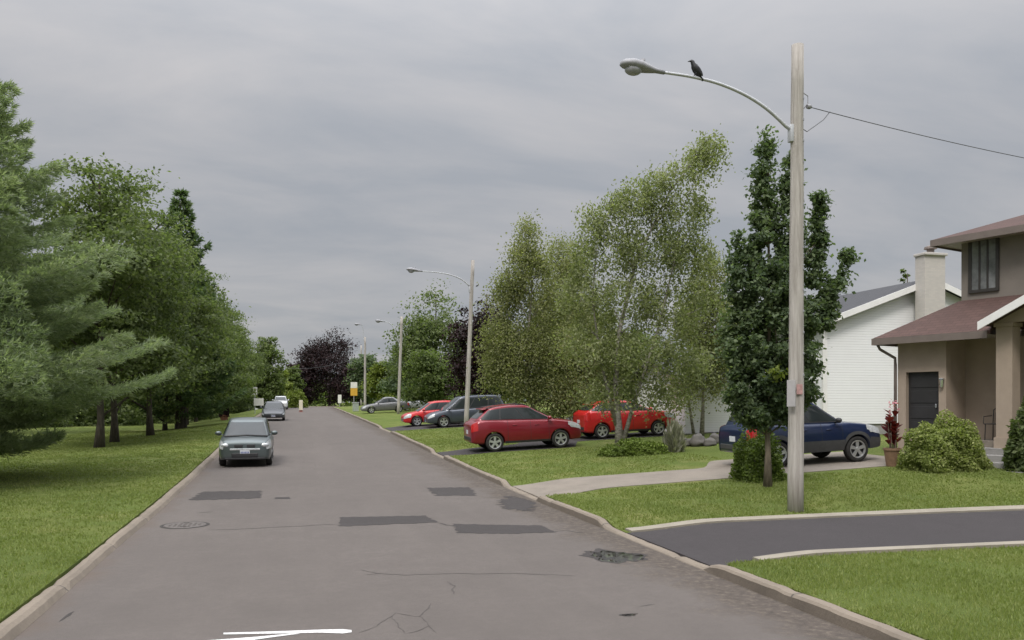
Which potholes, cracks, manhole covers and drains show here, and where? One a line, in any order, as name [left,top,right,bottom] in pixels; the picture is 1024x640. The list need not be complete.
pothole [579,548,648,563]
crack [364,570,573,594]
crack [362,603,435,633]
